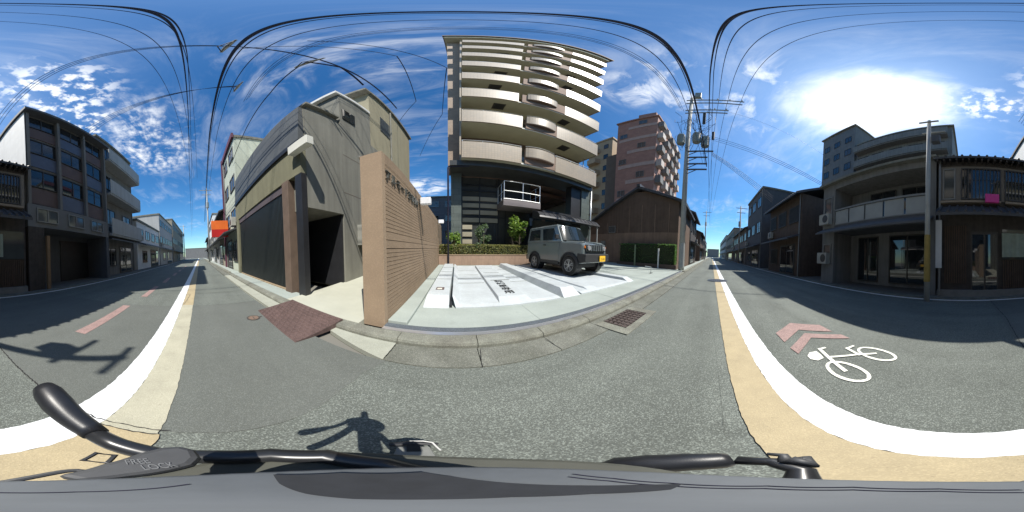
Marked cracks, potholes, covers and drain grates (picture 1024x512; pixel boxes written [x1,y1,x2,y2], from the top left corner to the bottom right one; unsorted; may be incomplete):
drain grate [596,307,656,335]
